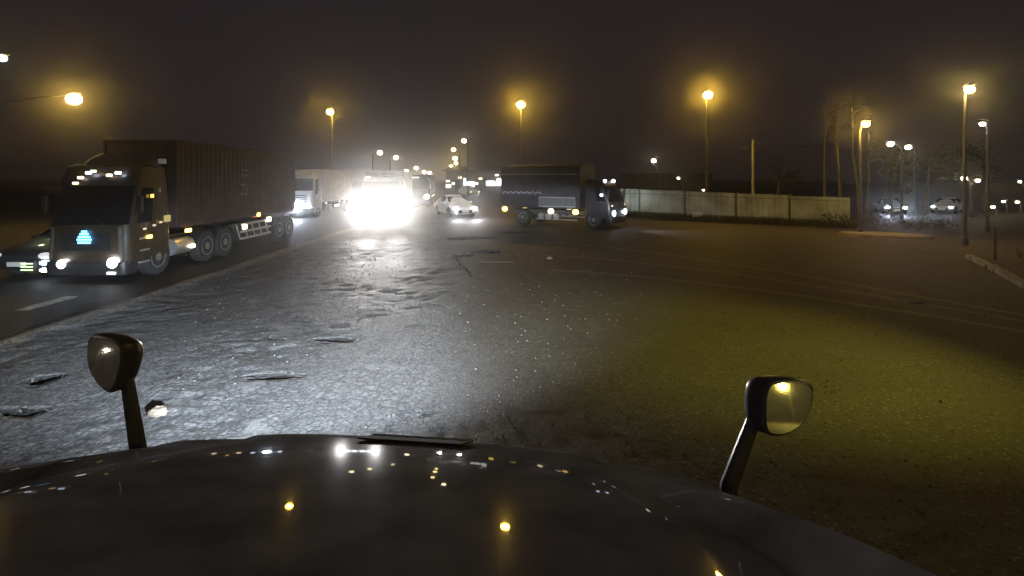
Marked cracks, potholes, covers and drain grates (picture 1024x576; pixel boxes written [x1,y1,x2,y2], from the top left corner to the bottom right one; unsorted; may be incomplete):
pothole [20,372,67,387]
pothole [242,371,306,381]
crack [452,258,474,276]
pothole [0,405,49,418]
